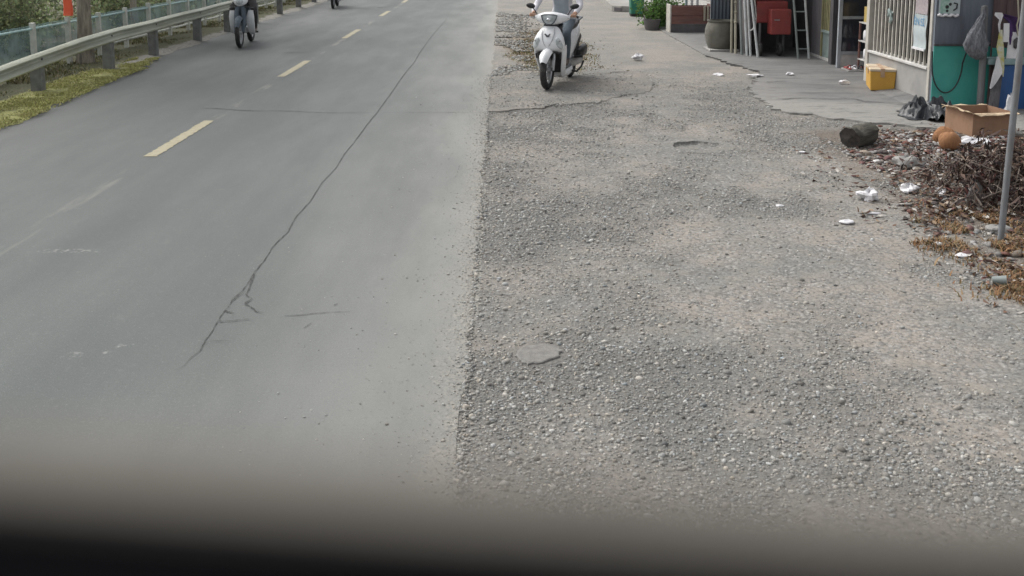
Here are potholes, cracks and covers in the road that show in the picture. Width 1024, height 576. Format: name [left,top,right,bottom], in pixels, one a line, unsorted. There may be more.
pothole [660,139,735,153]
crack [175,19,628,370]
